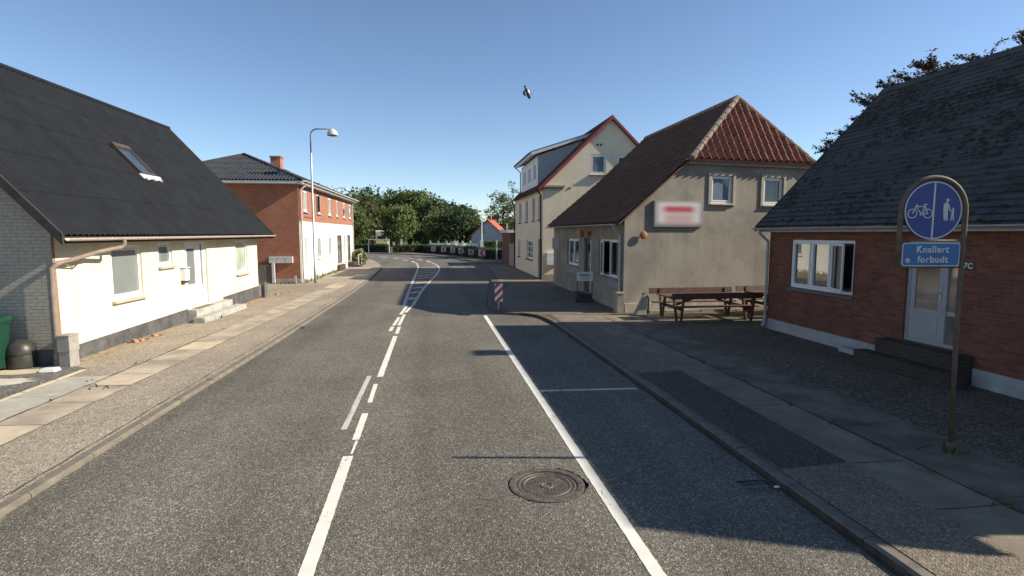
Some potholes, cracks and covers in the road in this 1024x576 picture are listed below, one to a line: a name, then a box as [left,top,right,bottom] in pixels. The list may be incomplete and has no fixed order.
manhole cover [508,468,589,503]
drain grate [738,480,777,493]
